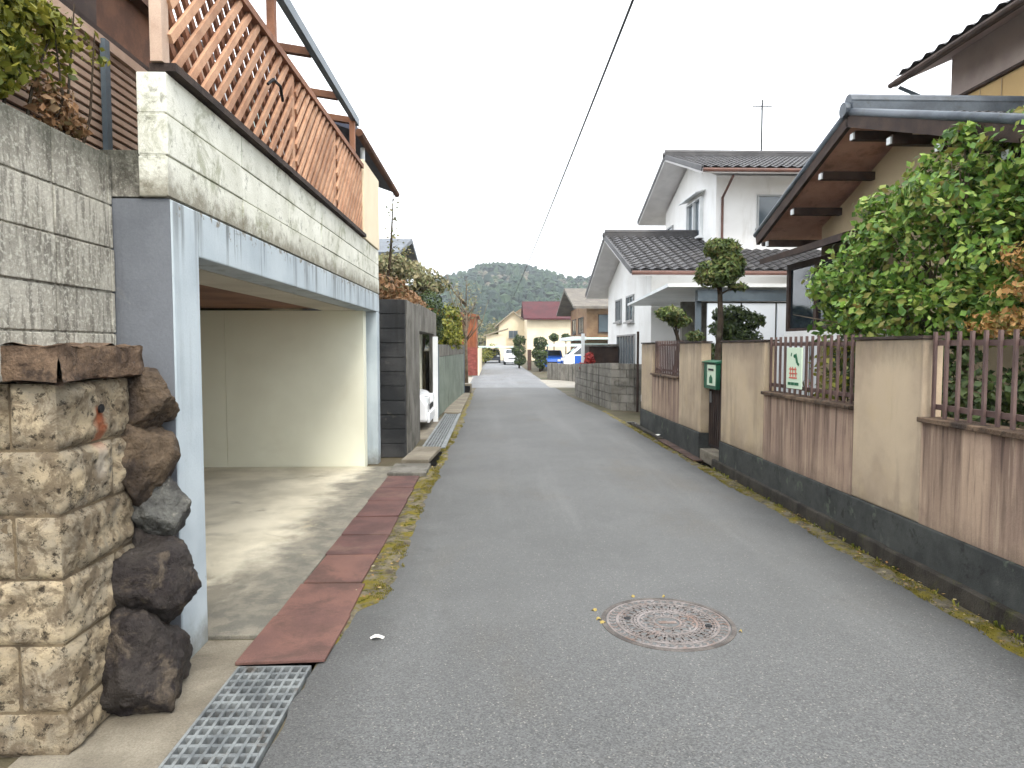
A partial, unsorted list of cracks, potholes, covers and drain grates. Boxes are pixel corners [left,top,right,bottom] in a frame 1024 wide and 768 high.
drain grate [422,413,461,449]
drain grate [158,665,311,768]
manhole cover [601,598,737,652]
